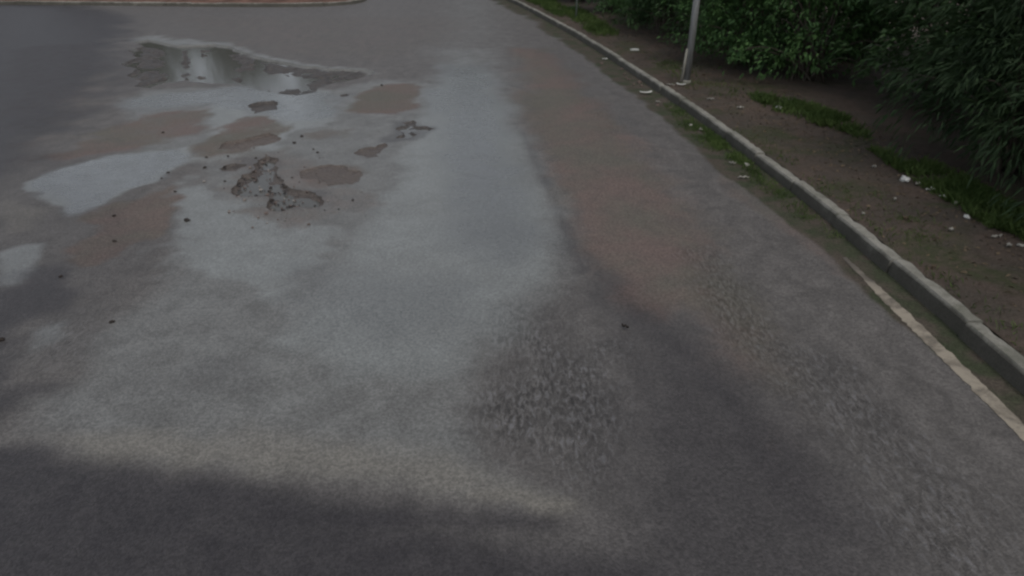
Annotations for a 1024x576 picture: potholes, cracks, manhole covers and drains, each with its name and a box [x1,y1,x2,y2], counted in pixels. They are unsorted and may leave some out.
pothole [231,156,324,212]
pothole [354,143,388,158]
pothole [121,39,375,96]
pothole [248,101,278,114]
pothole [220,163,247,171]
